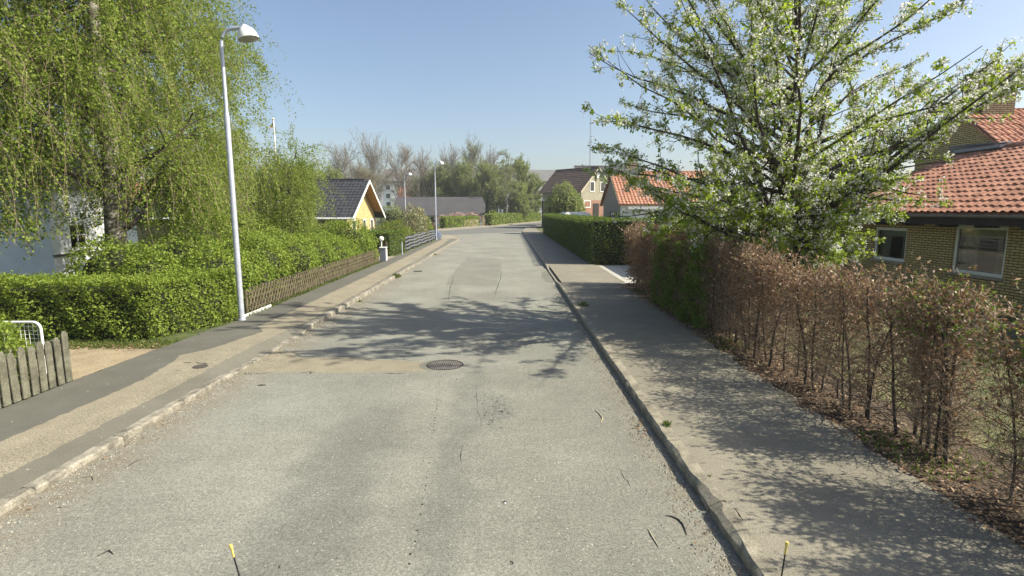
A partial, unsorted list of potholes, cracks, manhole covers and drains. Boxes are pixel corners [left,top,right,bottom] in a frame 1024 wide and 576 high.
manhole cover [426,360,464,370]
